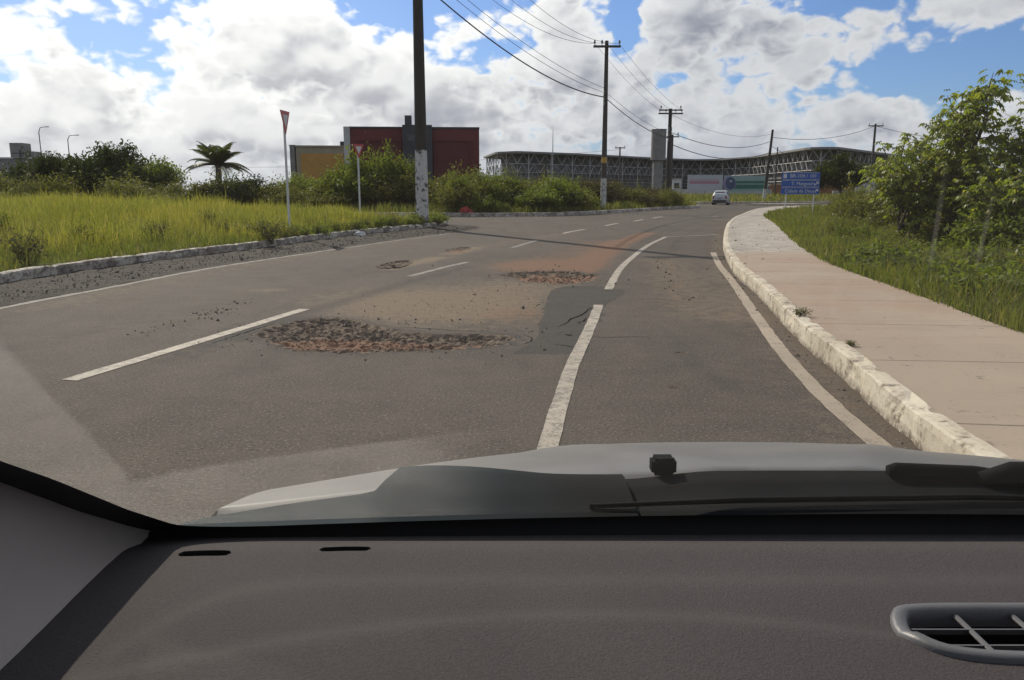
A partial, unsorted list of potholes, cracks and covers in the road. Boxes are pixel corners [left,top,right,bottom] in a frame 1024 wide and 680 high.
pothole [250,317,517,354]
pothole [500,270,602,285]
crack [558,307,593,327]
pothole [376,260,413,269]
